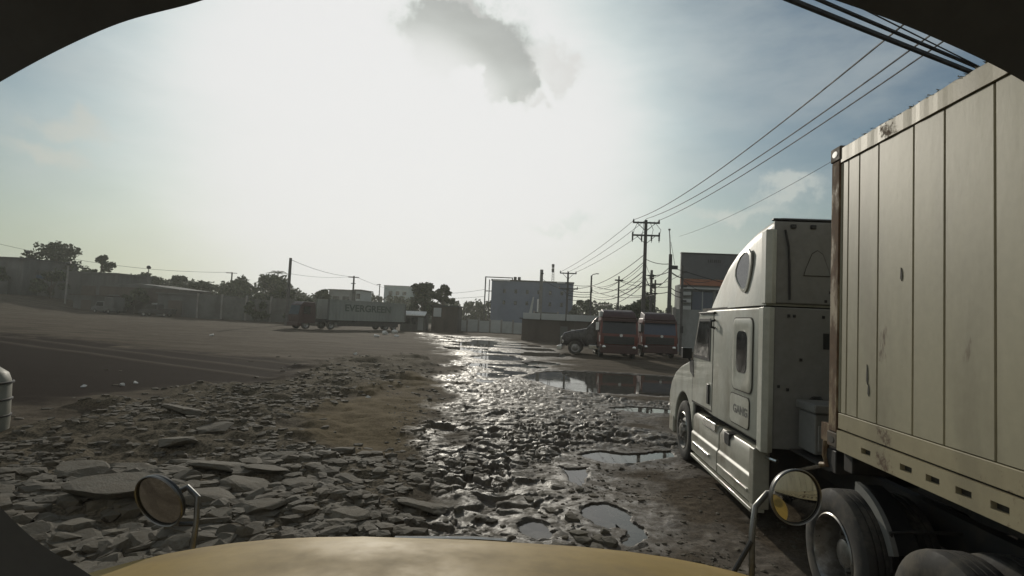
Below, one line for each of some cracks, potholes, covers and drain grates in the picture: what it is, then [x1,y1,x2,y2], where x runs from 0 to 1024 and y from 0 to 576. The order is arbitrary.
pothole [609,406,670,414]
pothole [553,464,594,487]
pothole [503,514,569,541]
pothole [574,501,650,551]
pothole [580,450,677,466]
pothole [513,371,674,397]
